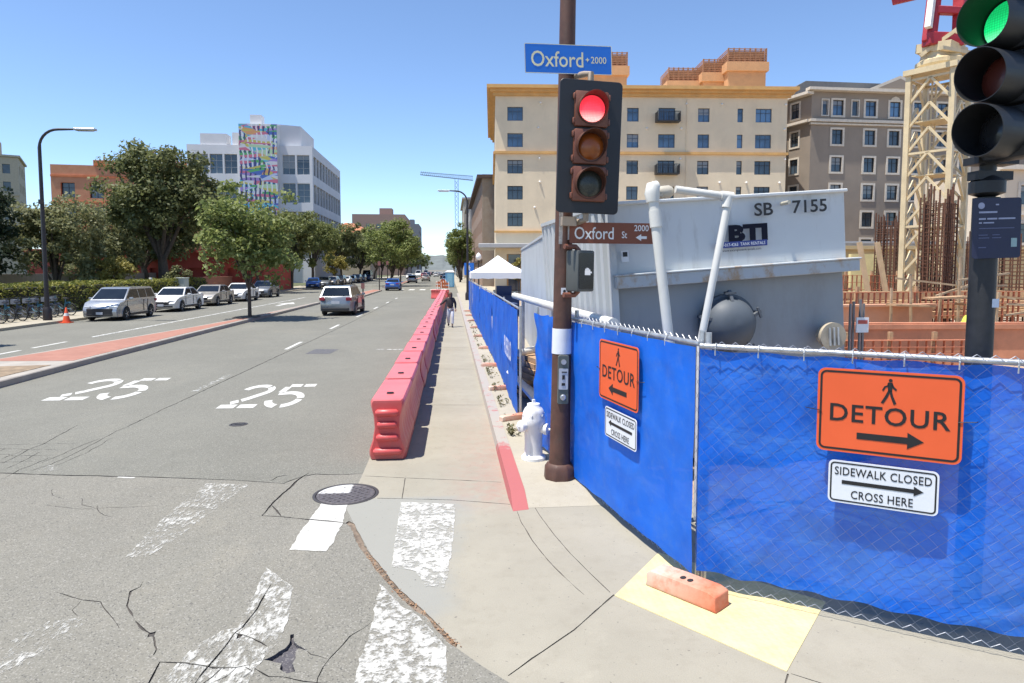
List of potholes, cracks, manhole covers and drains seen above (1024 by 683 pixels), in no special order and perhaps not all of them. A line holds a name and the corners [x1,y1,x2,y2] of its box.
pothole [264,634,307,673]
crack [57,473,457,683]
manhole cover [312,483,379,505]
crack [0,427,74,479]
